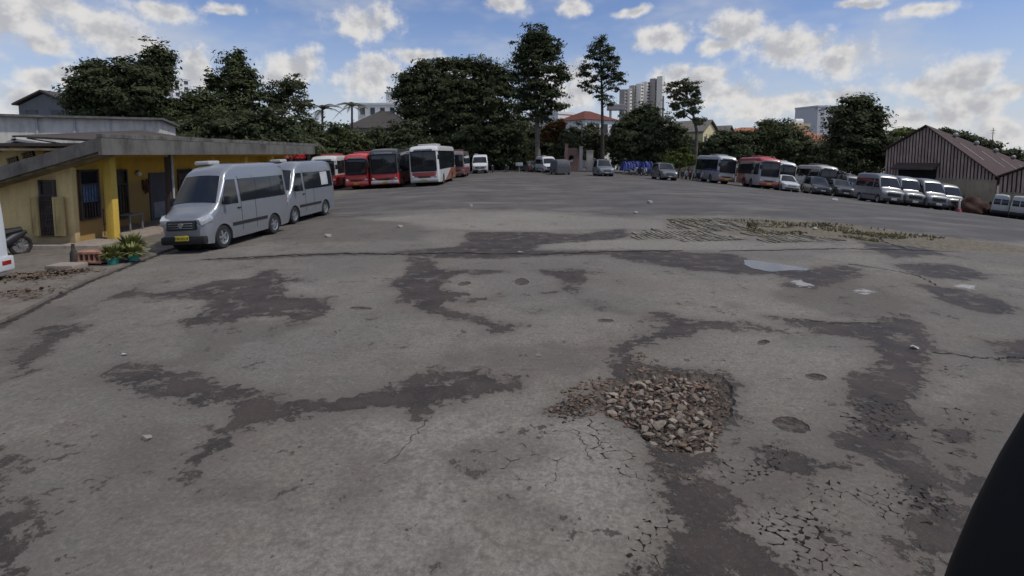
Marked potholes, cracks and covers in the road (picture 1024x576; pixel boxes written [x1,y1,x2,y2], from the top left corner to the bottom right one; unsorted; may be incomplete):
crack [934,352,1024,376]
pothole [593,372,736,453]
crack [552,395,675,571]
pothole [805,373,827,381]
pothole [772,416,811,433]
crack [737,473,955,576]
